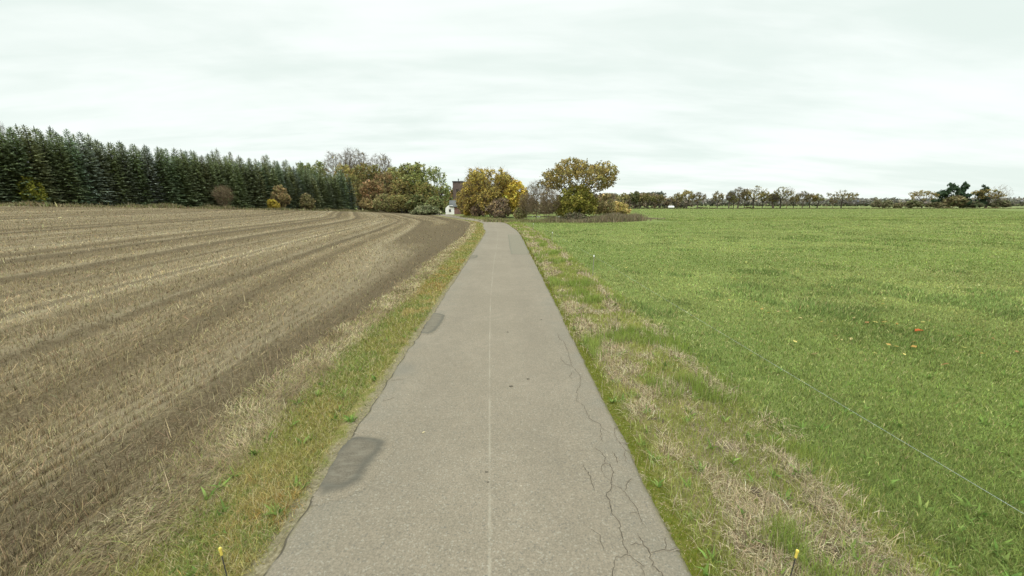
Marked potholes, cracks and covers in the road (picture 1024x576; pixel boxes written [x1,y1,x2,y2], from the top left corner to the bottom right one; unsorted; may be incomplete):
crack [557,333,680,576]
